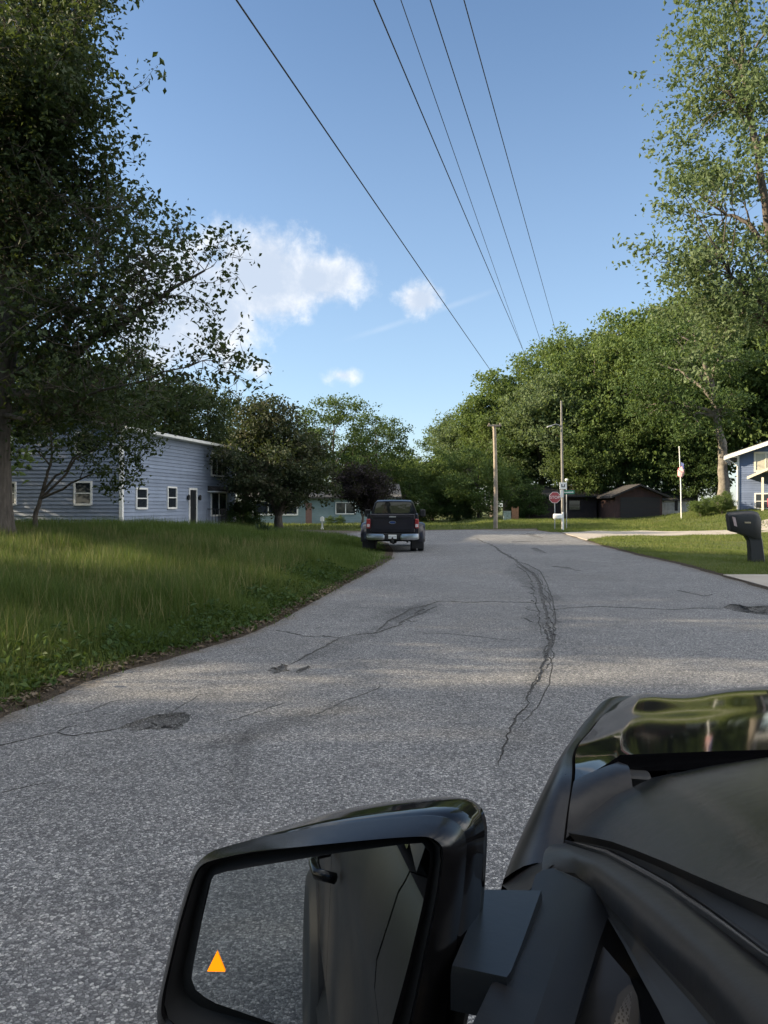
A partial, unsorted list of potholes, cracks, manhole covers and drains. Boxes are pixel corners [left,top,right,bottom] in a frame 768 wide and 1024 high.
pothole [724,604,768,615]
pothole [268,664,290,674]
crack [0,698,124,746]
pothole [118,712,191,731]
crack [277,533,715,767]
